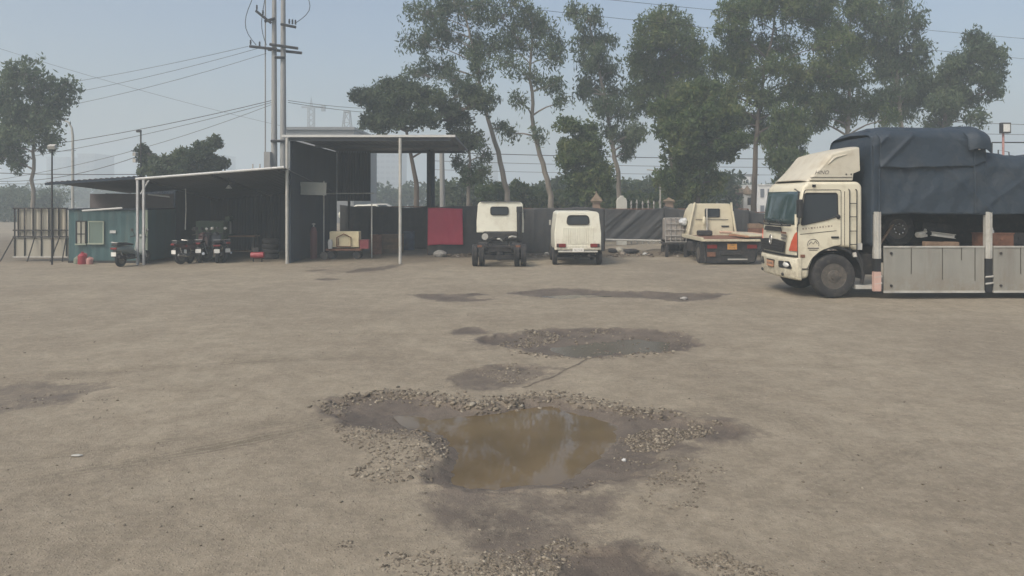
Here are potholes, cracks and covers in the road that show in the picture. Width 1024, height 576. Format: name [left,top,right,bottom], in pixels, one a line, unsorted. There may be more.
pothole [451,365,551,390]
pothole [548,546,663,576]
crack [522,359,587,388]
pothole [480,328,702,358]
pothole [320,393,743,494]
